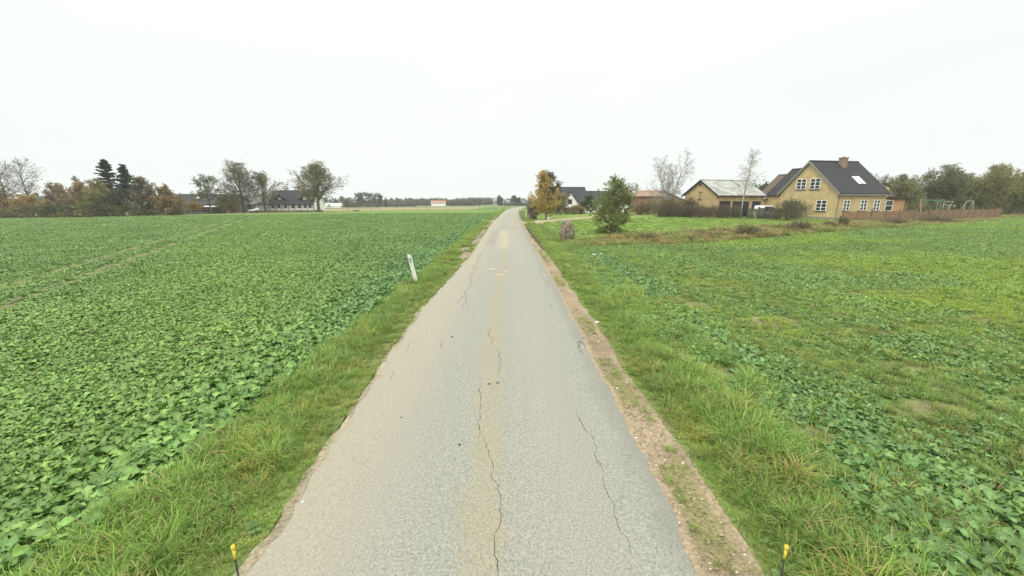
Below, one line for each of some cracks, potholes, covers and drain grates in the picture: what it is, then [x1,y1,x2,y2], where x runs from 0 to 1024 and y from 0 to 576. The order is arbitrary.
crack [478,386,502,575]
crack [575,410,633,559]
crack [461,248,501,367]
